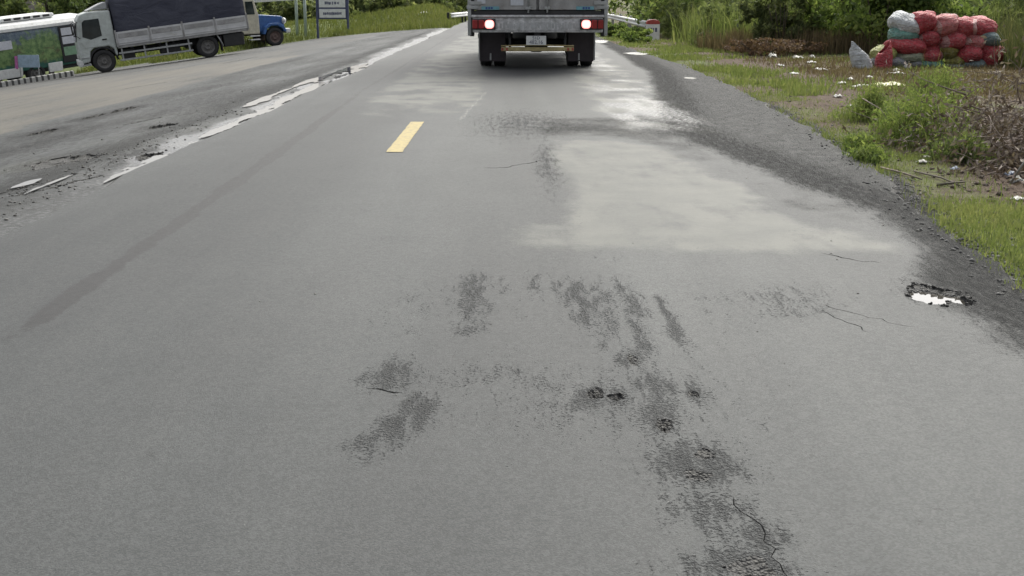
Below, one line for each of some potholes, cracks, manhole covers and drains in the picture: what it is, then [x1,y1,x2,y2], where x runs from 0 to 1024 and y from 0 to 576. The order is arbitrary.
pothole [901,282,977,307]
pothole [606,392,625,402]
pothole [586,387,604,399]
crack [821,305,913,333]
crack [733,498,787,576]
pothole [655,418,674,434]
